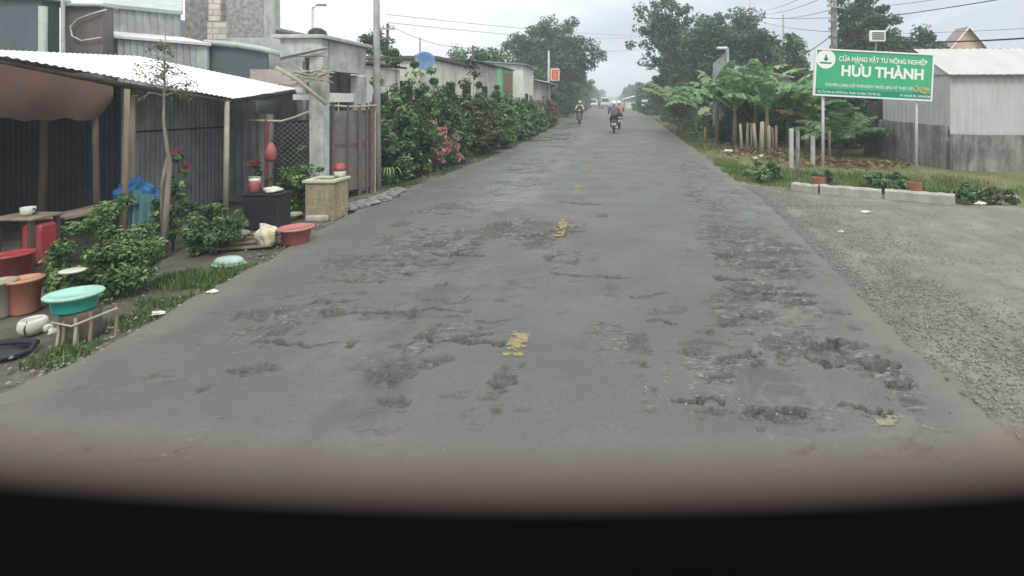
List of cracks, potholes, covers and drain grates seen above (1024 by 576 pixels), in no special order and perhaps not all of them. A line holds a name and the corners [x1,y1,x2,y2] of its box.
pothole [746,405,809,424]
pothole [807,337,848,355]
pothole [374,372,420,386]
pothole [854,358,902,375]
pothole [884,377,919,391]
pothole [379,395,413,409]
pothole [712,250,739,258]
pothole [490,368,519,400]
pothole [735,311,764,320]
pothole [228,361,284,377]
pothole [848,340,870,351]
pothole [421,352,457,367]
